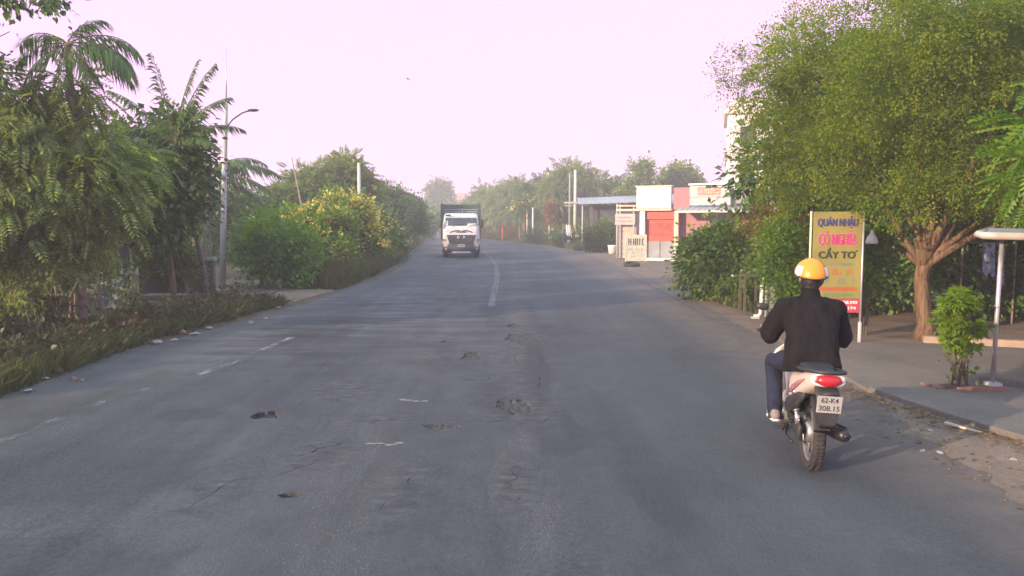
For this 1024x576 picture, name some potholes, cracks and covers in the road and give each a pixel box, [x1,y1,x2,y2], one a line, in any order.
pothole [505,333,541,345]
pothole [459,352,481,360]
pothole [250,410,283,419]
crack [274,440,359,476]
crack [459,353,550,387]
pothole [496,399,534,416]
